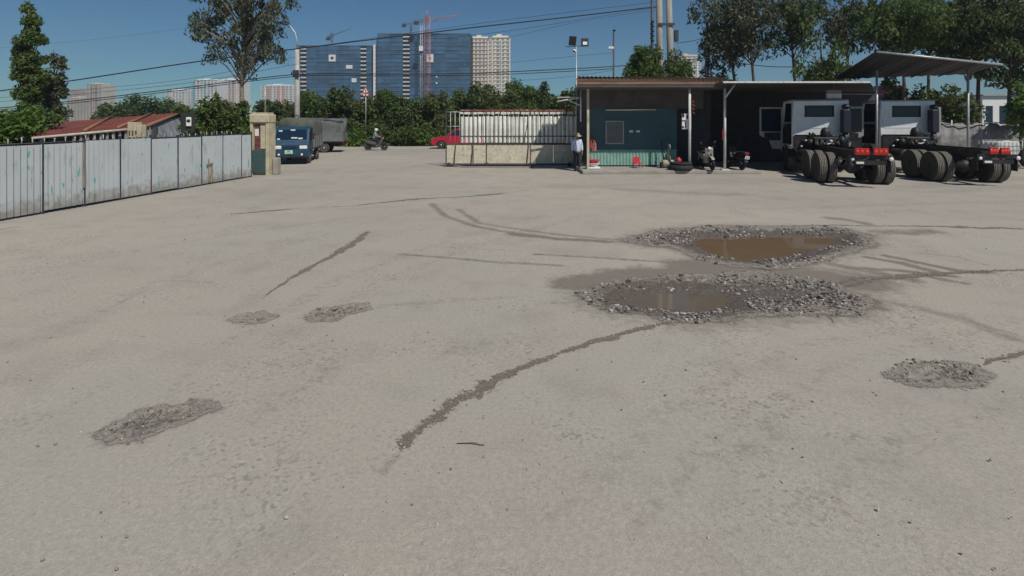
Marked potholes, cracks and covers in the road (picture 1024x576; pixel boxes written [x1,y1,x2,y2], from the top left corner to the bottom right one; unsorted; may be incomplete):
pothole [93,397,222,445]
crack [259,230,369,299]
crack [390,315,691,463]
pothole [303,301,373,322]
pothole [618,224,880,271]
pothole [227,310,280,324]
pothole [880,358,998,390]
pothole [575,269,882,324]
crack [982,350,1024,365]
